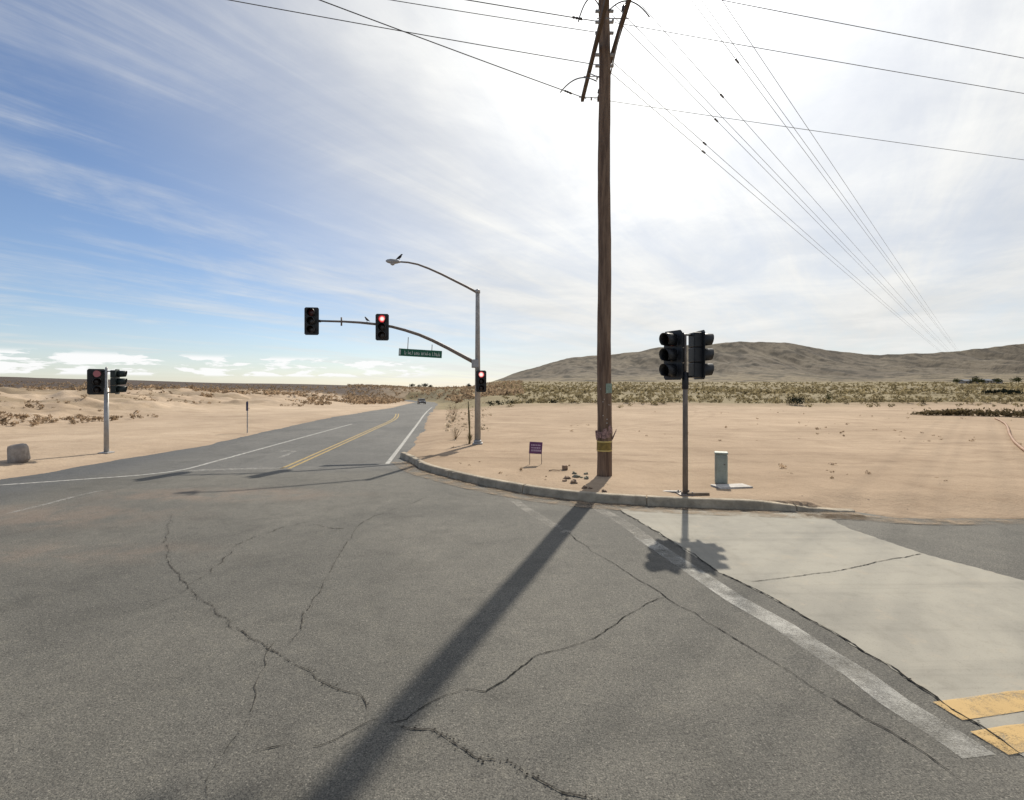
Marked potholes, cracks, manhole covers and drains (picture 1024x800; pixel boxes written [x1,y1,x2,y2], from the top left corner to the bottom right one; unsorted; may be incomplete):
crack [252,596,666,800]
crack [149,500,419,795]
